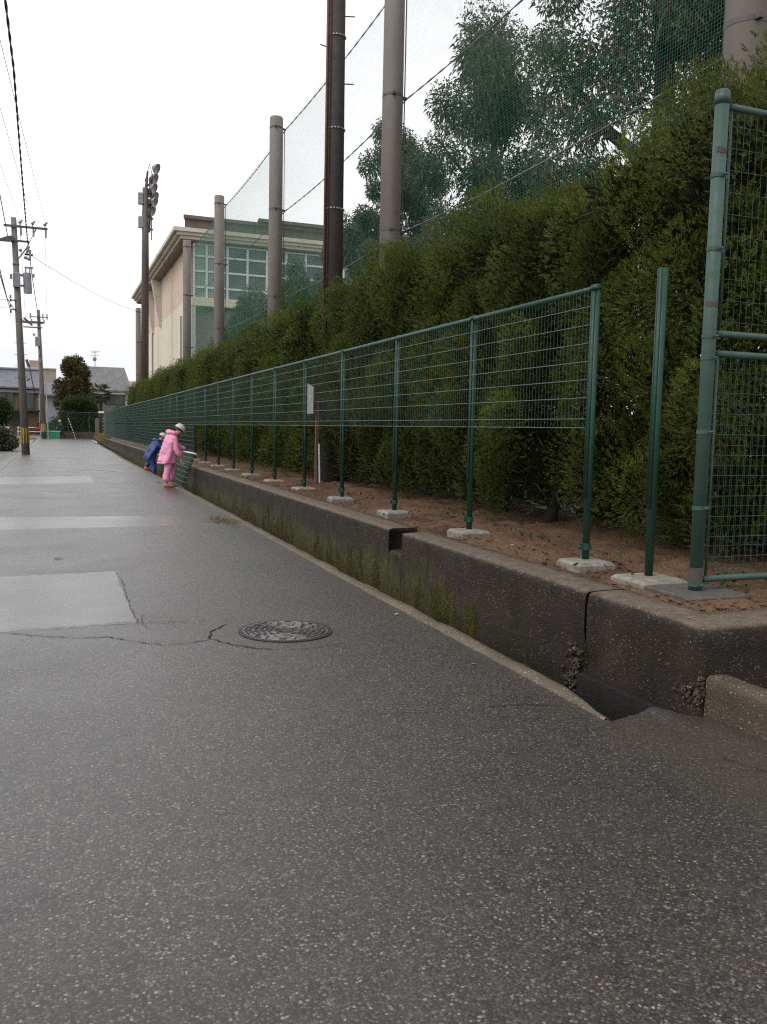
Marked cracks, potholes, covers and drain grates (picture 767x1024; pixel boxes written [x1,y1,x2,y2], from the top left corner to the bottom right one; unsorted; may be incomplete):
crack [15,573,339,649]
crack [352,698,569,716]
manhole cover [238,620,332,643]
